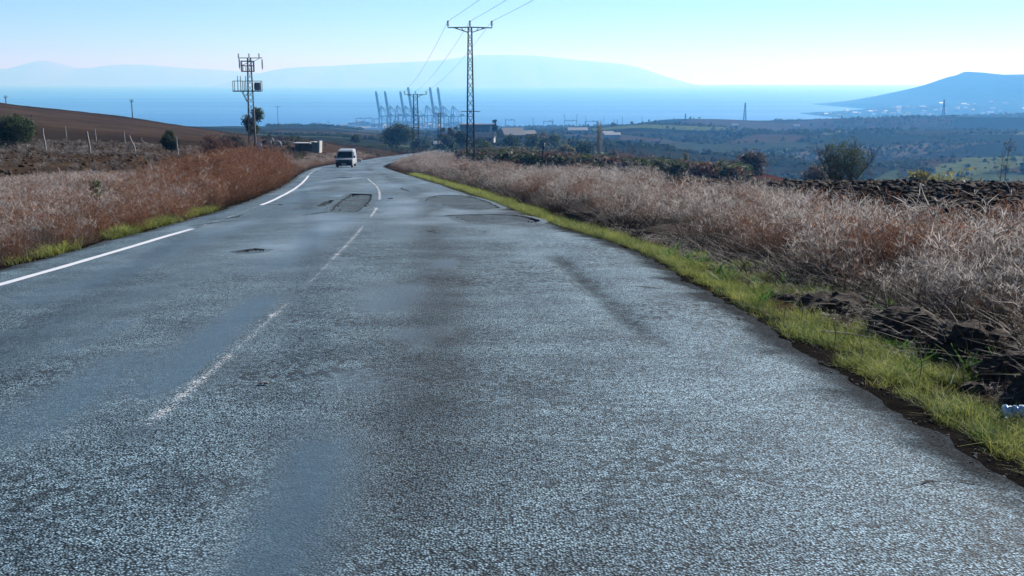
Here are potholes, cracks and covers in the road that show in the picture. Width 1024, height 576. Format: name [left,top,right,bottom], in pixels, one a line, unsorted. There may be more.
pothole [322,194,377,213]
